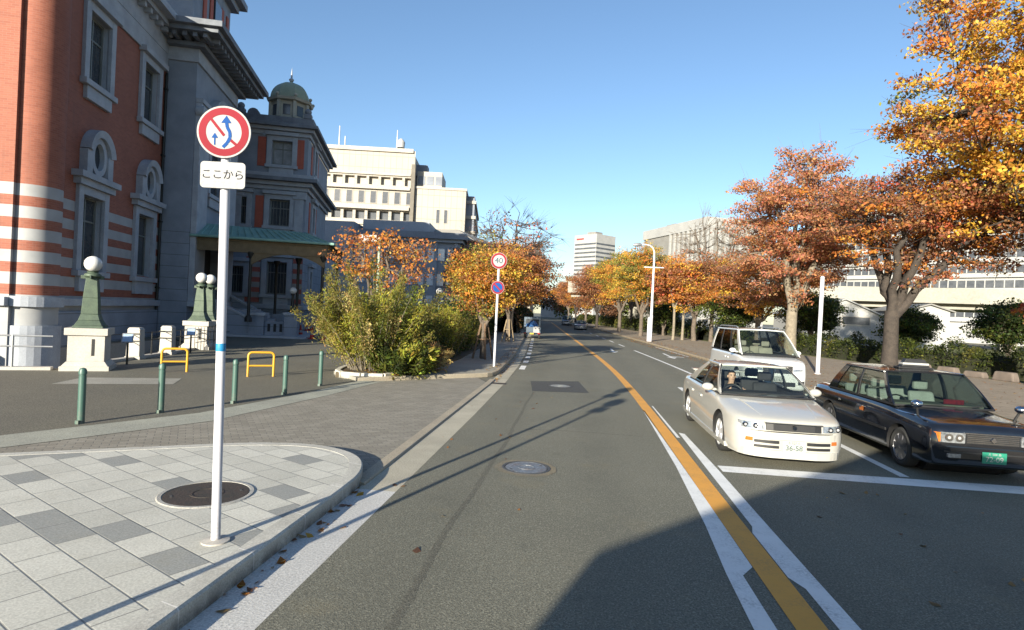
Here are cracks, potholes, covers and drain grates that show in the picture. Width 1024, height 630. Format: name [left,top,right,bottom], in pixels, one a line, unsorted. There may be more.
manhole cover [155,480,255,509]
manhole cover [494,460,556,477]
